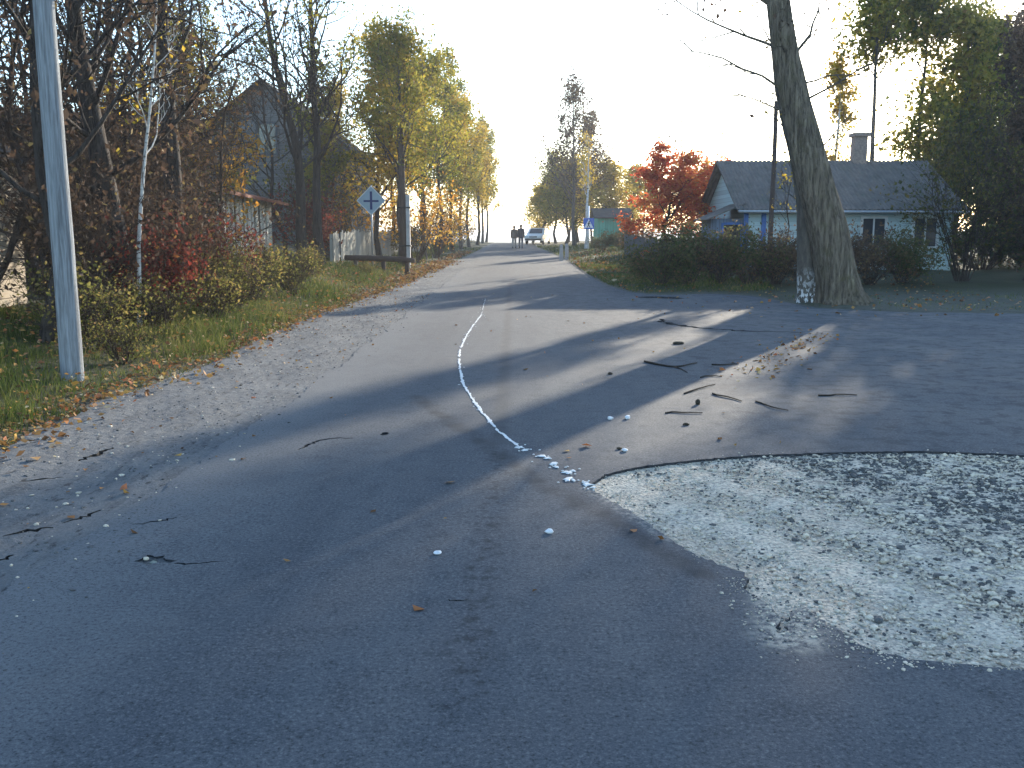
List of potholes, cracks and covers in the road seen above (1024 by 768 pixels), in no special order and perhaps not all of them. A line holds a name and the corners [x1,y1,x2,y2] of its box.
crack [5,510,101,536]
crack [657,319,773,332]
crack [298,437,348,450]
crack [78,448,113,461]
